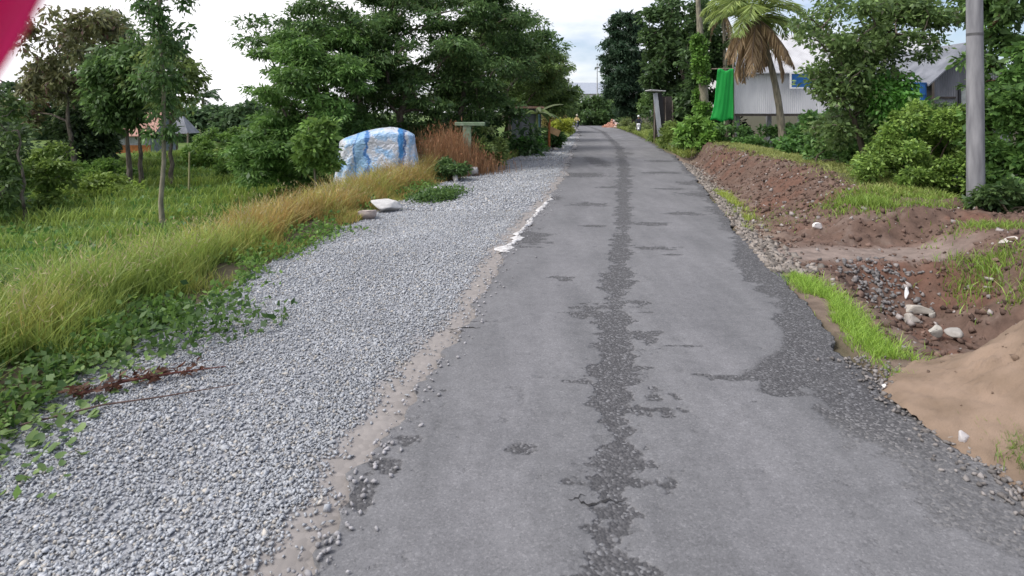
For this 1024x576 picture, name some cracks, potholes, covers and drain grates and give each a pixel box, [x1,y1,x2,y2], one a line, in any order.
crack [569,494,623,506]
